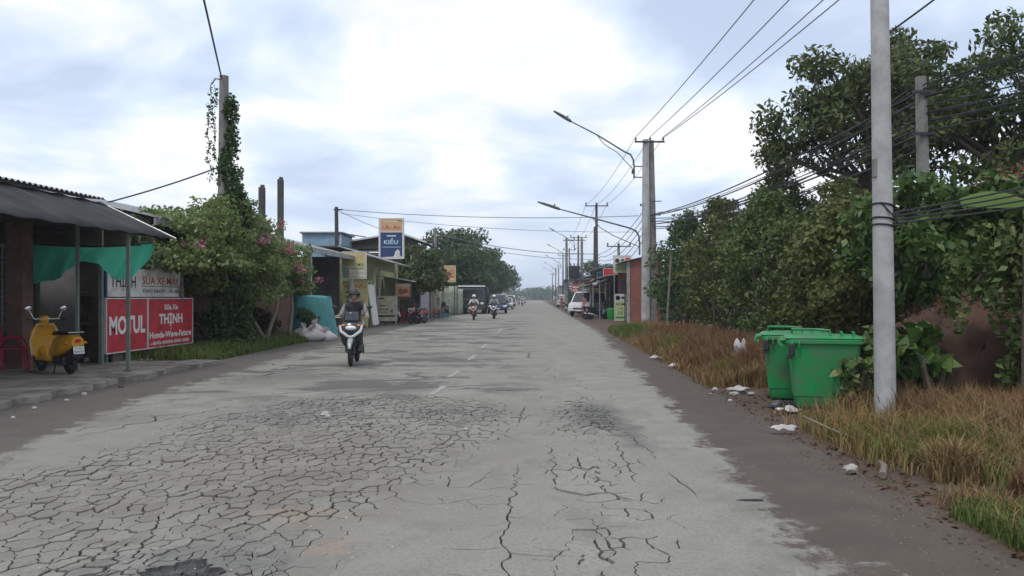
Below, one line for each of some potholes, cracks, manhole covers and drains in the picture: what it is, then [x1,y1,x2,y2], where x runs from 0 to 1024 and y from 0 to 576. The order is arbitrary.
pothole [138,559,226,576]
crack [551,454,678,576]
